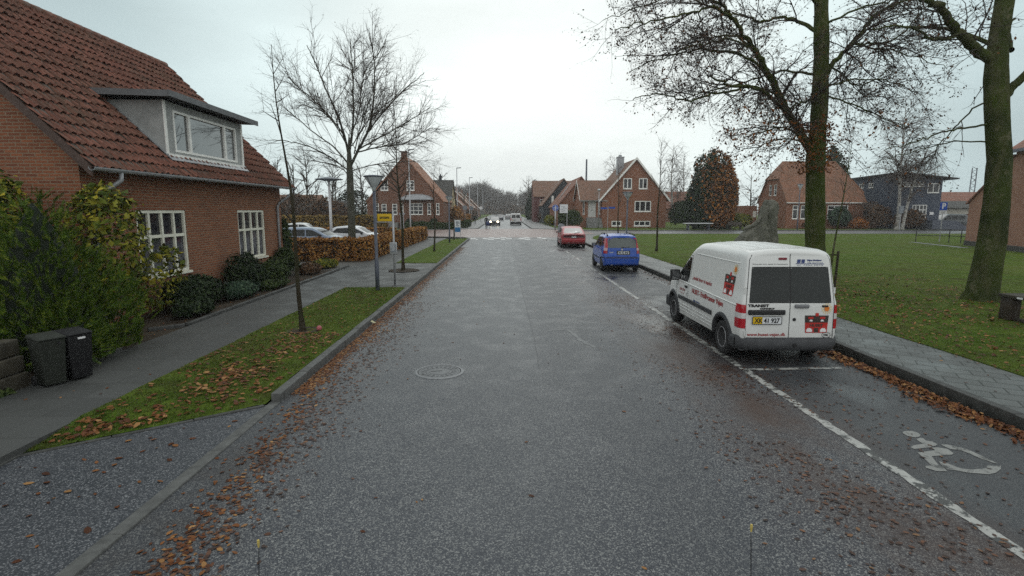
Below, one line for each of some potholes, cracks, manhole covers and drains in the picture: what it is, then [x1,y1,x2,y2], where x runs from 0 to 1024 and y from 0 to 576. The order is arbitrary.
manhole cover [414,364,464,379]
